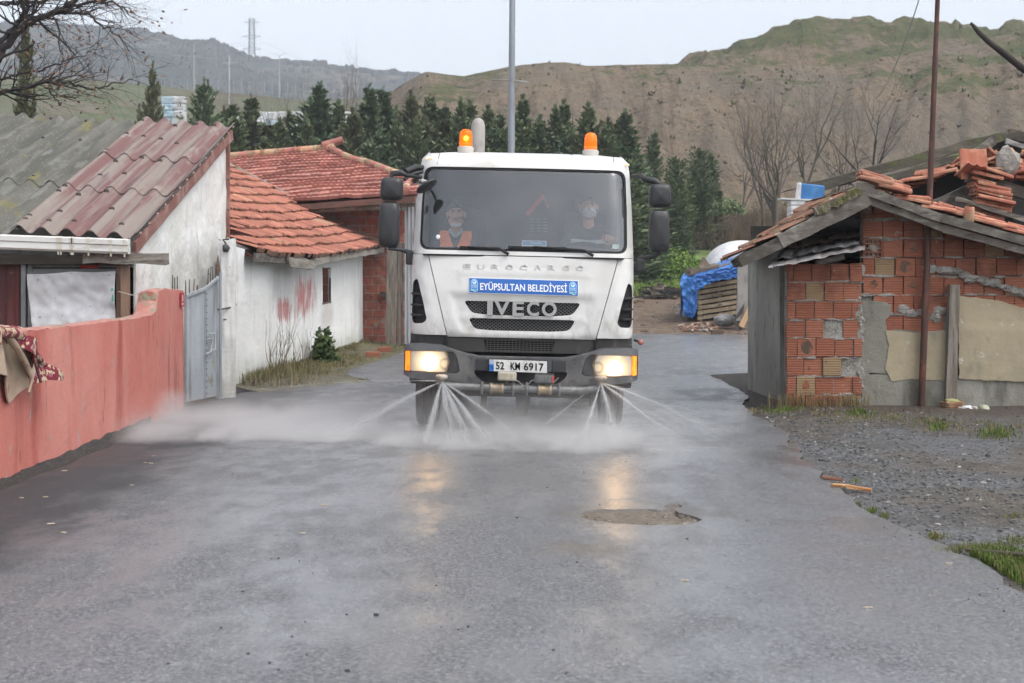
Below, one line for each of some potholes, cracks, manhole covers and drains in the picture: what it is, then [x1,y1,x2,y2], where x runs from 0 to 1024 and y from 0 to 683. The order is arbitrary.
pothole [579,504,701,525]
